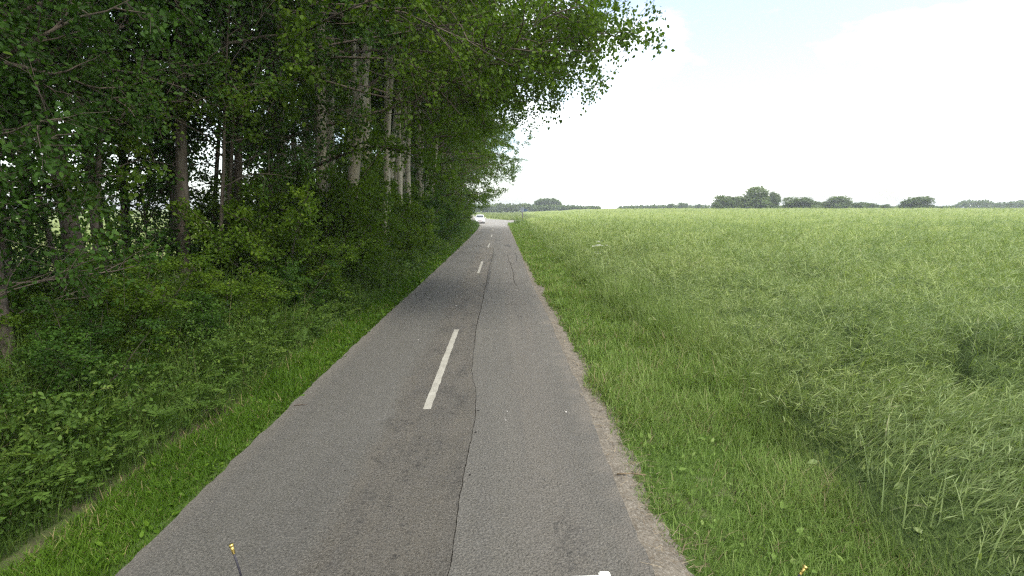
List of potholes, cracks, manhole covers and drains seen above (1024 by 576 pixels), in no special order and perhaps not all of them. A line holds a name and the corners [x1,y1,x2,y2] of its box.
crack [447,248,494,576]
